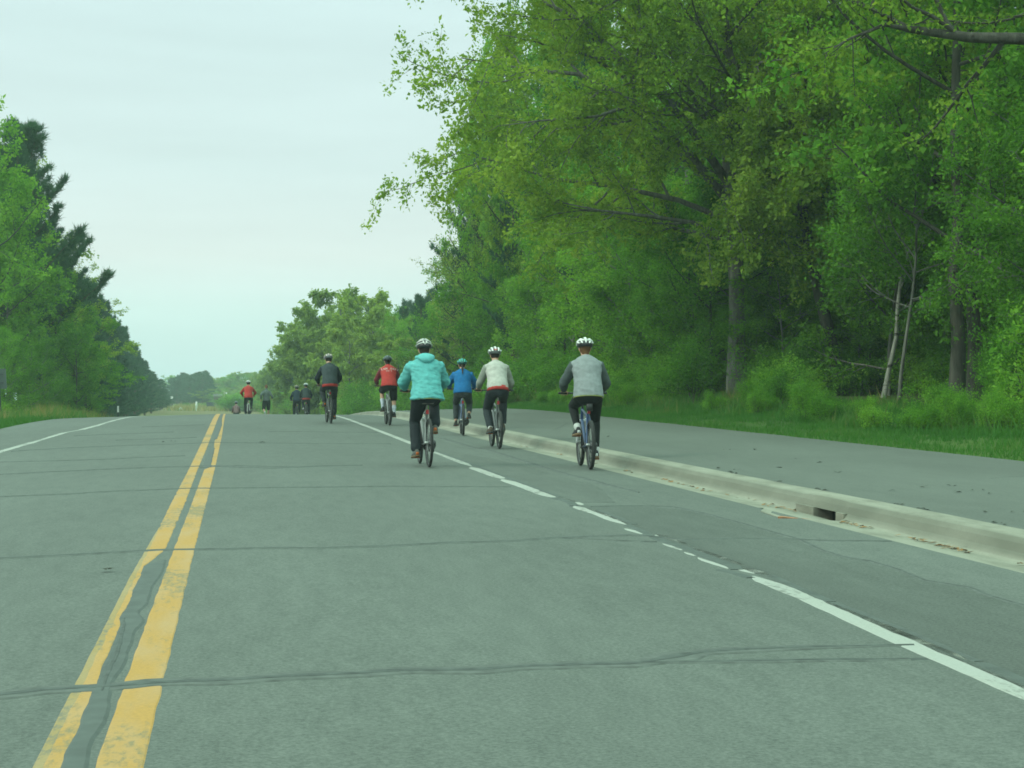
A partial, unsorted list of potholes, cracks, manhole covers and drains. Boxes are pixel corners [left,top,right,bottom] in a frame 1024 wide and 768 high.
crack [0,644,928,700]
drain grate [761,492,859,521]
crack [0,422,1024,606]
